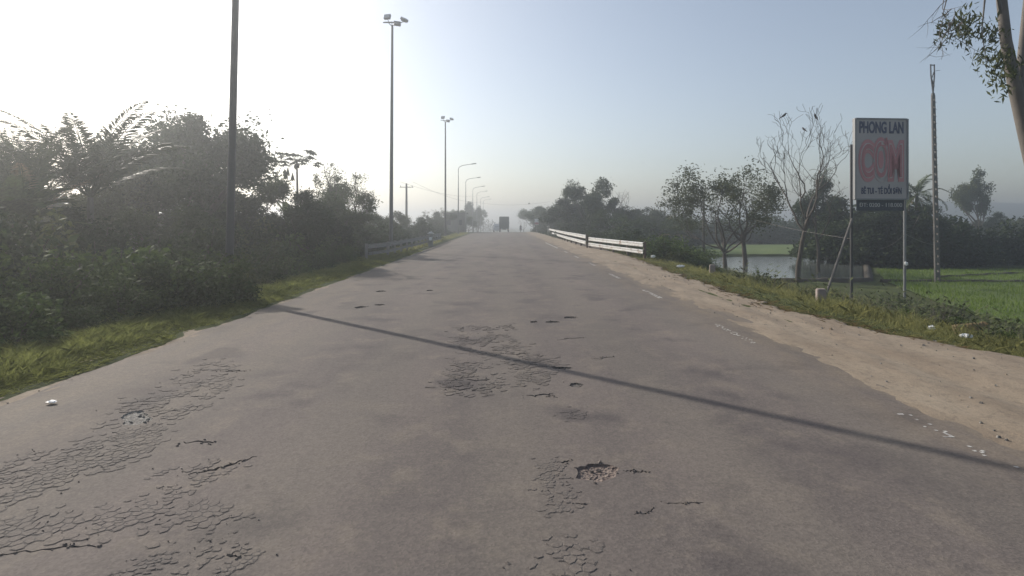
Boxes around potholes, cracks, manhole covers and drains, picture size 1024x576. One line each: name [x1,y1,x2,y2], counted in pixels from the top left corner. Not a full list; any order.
pothole [120,411,153,425]
pothole [571,460,620,484]
crack [502,456,631,576]
crack [0,357,278,576]
crack [424,323,588,422]
crack [634,501,704,515]
